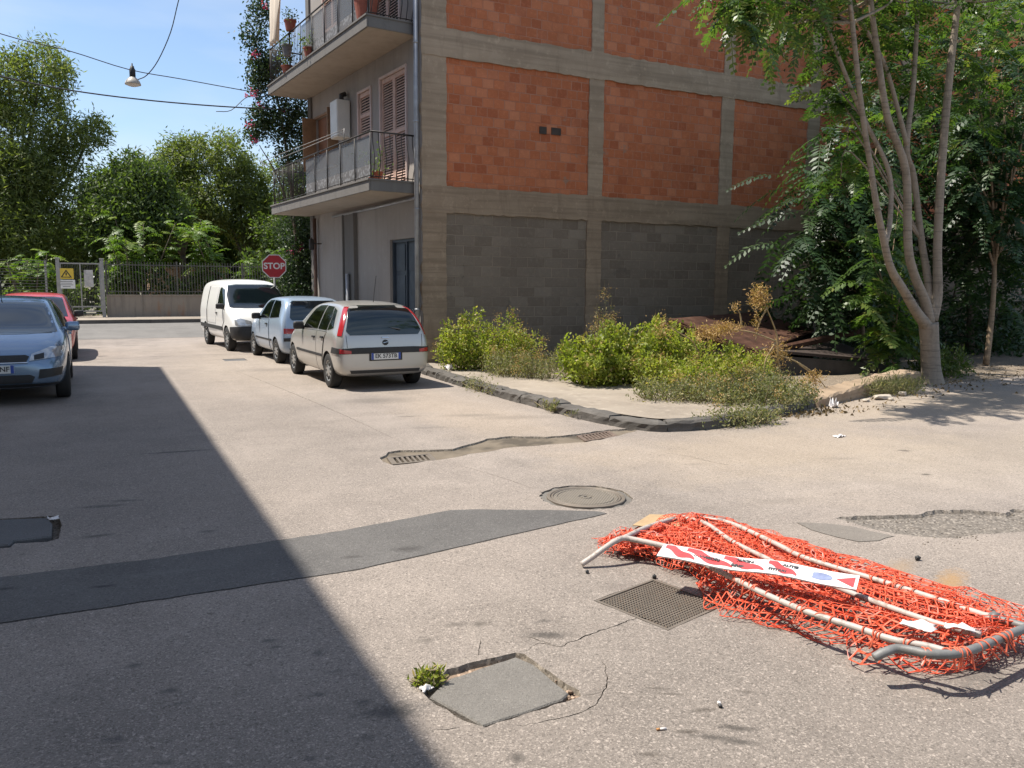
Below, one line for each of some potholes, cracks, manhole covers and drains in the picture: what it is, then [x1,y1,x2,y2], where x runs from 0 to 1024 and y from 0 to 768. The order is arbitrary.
crack [528,616,659,647]
crack [516,662,608,726]
drain grate [387,453,436,465]
drain grate [577,431,617,442]
manhole cover [539,486,633,510]
